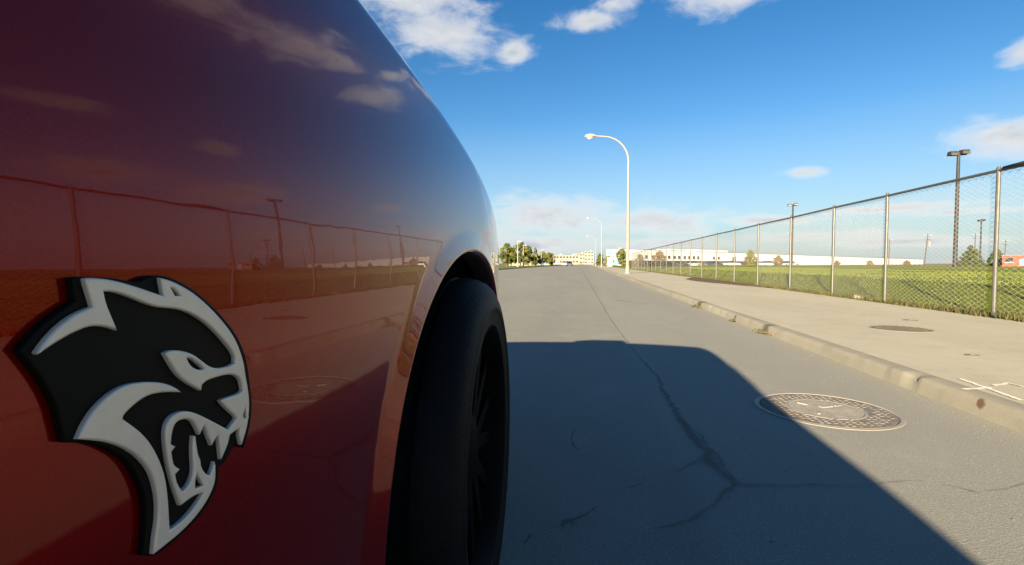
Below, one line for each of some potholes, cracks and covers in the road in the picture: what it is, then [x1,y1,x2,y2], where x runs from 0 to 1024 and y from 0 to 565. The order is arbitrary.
manhole cover [755,393,906,431]
